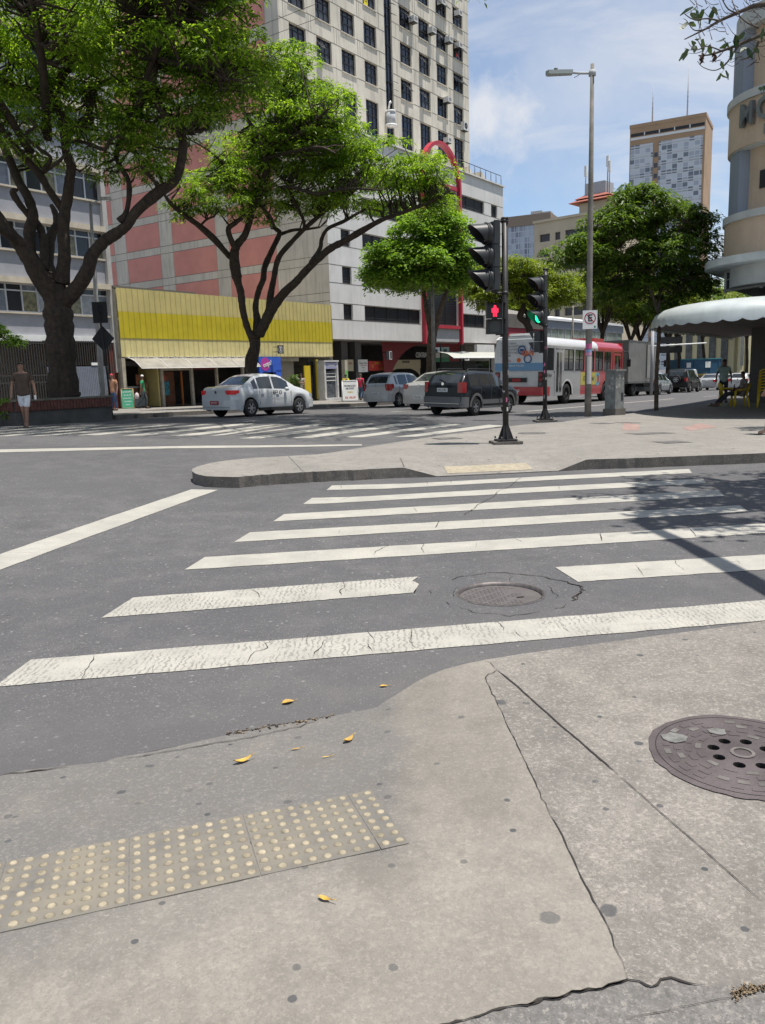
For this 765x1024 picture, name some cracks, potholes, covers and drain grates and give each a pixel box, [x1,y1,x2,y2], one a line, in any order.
crack [431,572,585,635]
crack [441,969,765,1024]
manhole cover [649,715,765,801]
manhole cover [456,582,546,606]
